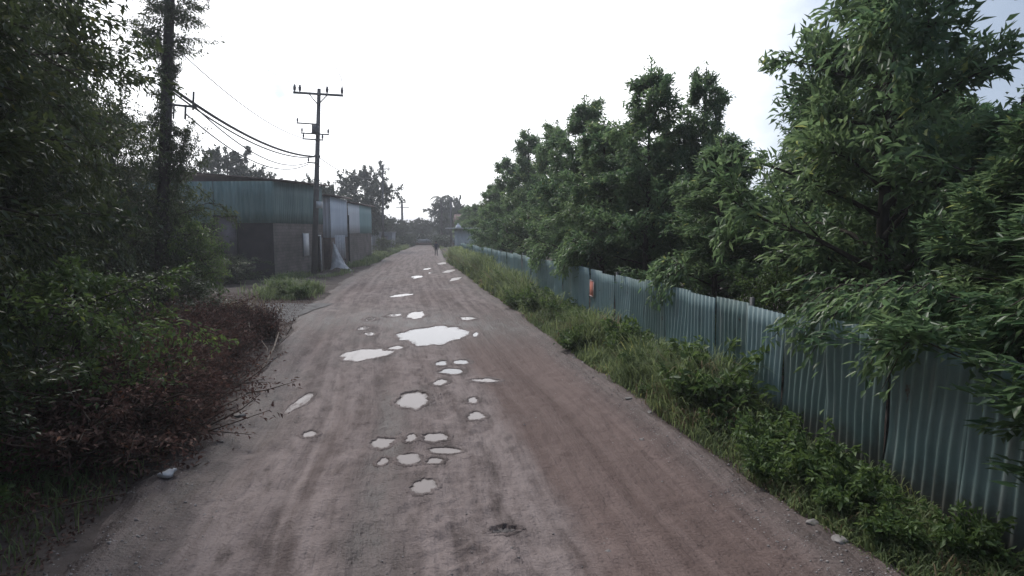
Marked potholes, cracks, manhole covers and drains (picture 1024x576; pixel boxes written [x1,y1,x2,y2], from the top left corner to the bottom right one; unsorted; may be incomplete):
pothole [389,389,435,412]
pothole [281,391,317,415]
pothole [462,409,491,422]
pothole [423,444,468,455]
pothole [427,378,453,387]
pothole [432,367,468,376]
pothole [392,451,426,468]
pothole [416,431,454,445]
pothole [364,435,401,451]
pothole [401,431,425,444]
pothole [402,310,430,320]
pothole [404,475,443,497]
